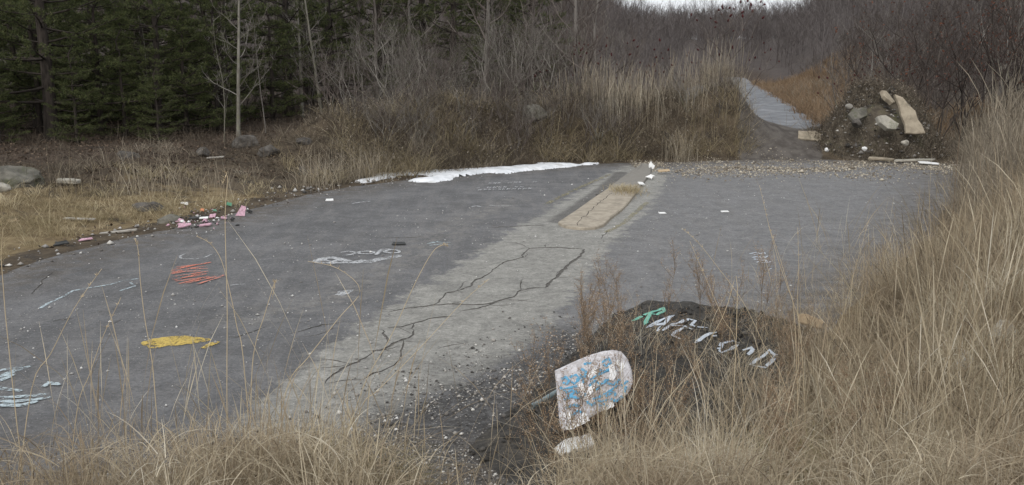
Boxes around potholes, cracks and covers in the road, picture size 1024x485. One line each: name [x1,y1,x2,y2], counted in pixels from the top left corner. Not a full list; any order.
crack [323,193,612,383]
